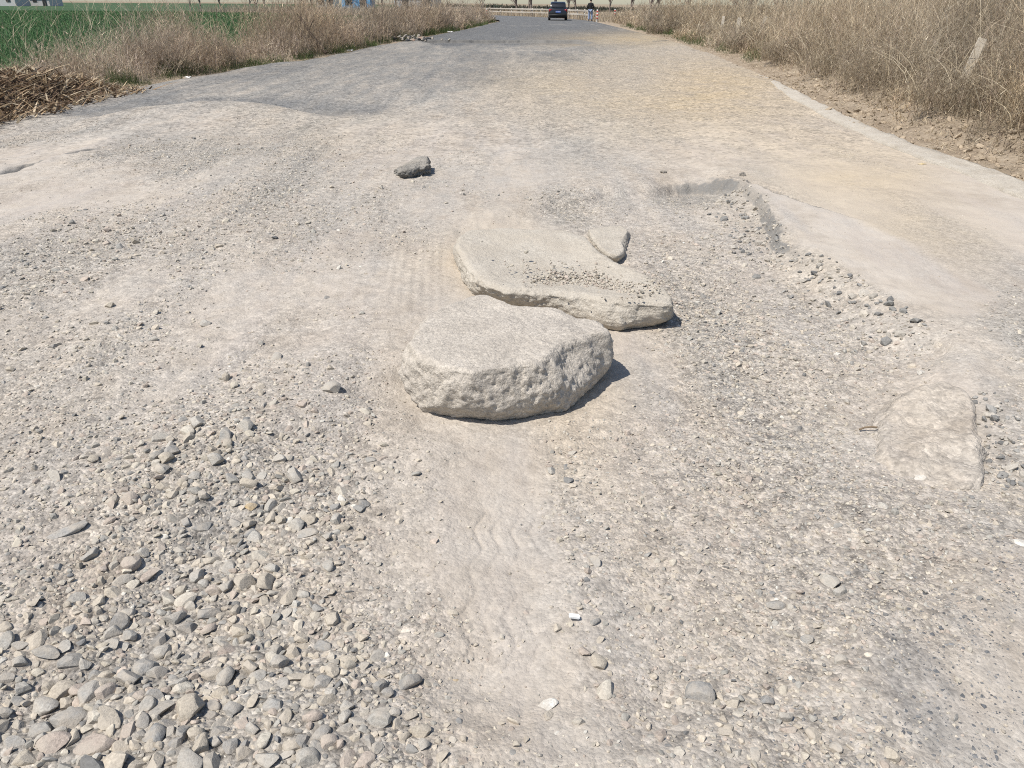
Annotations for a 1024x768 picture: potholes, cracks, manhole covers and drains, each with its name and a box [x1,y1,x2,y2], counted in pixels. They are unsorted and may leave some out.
pothole [0,175,1024,768]
